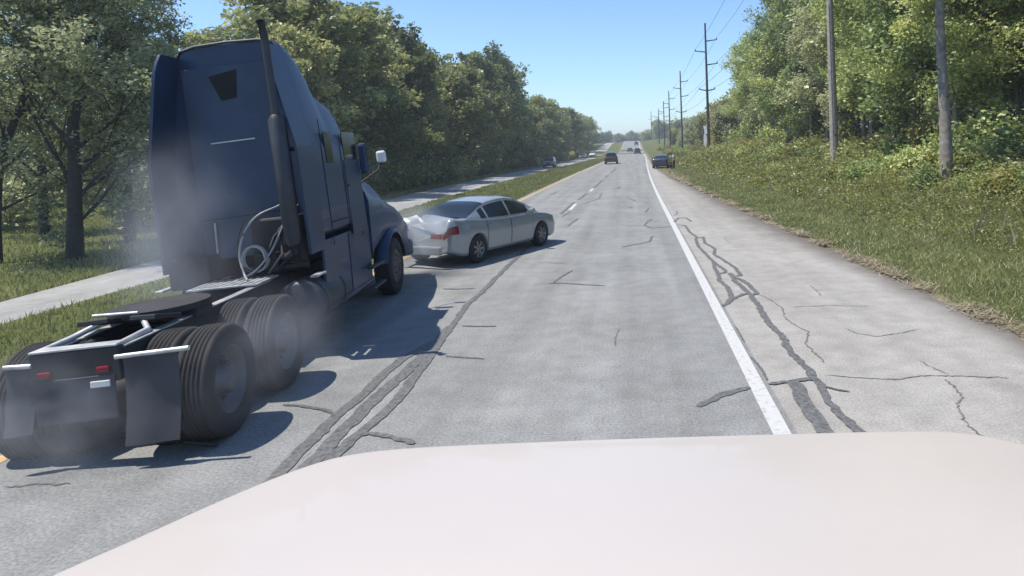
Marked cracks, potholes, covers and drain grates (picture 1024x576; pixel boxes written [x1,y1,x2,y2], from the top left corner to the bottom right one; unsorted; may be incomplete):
crack [760,285,1005,436]
